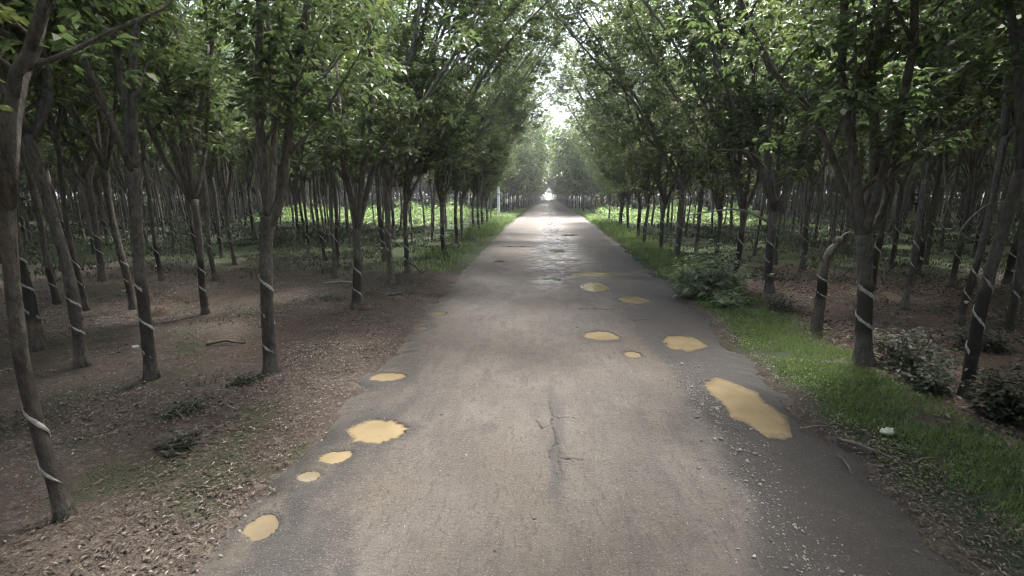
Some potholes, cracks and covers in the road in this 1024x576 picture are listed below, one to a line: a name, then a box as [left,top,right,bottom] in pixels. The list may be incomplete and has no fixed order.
crack [531,399,585,474]
